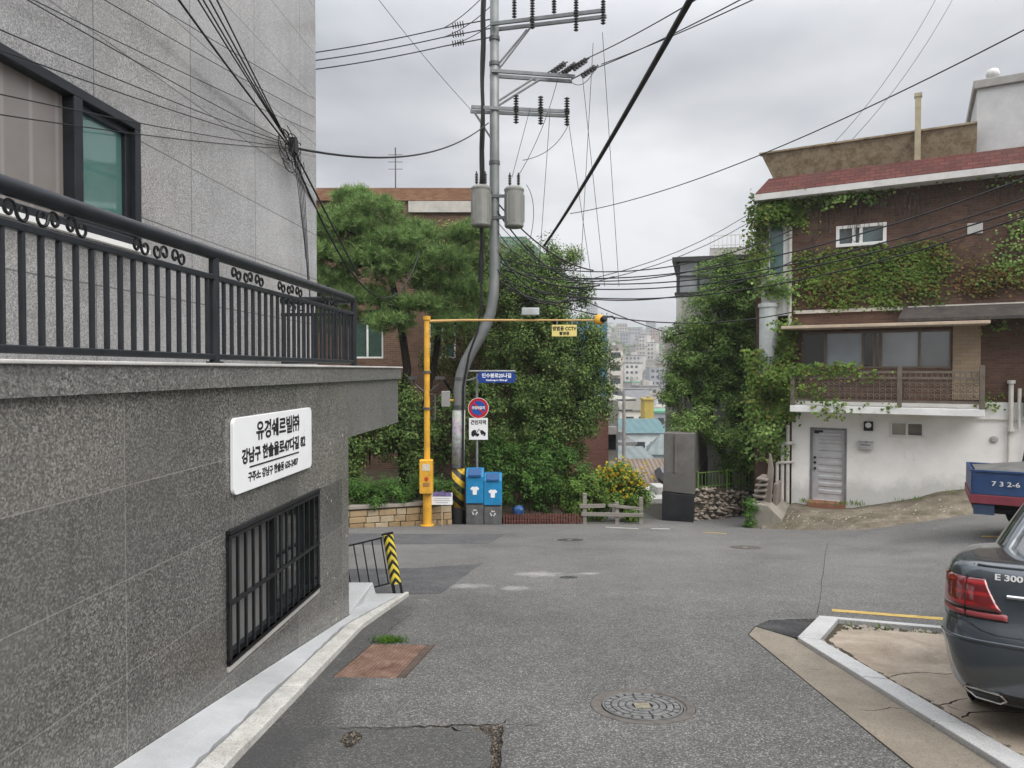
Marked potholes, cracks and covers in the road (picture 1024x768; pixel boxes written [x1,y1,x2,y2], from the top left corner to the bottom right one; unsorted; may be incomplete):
pothole [340,731,362,748]
crack [941,698,1023,718]
manhole cover [590,689,695,725]
